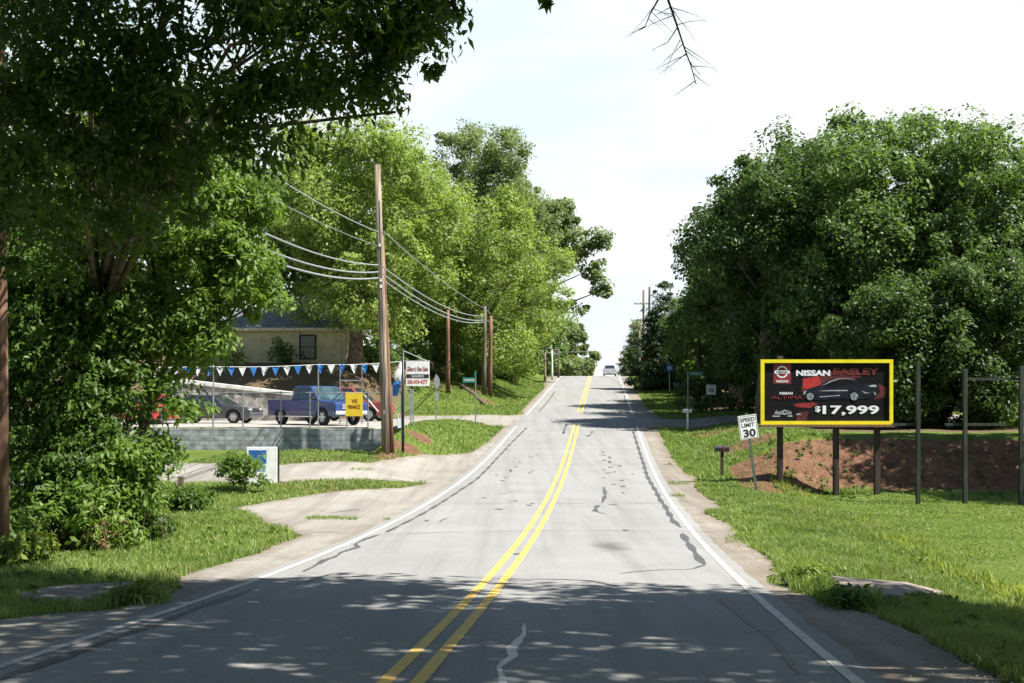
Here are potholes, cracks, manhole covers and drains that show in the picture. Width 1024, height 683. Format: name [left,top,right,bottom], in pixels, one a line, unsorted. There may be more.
crack [386,392,600,535]
